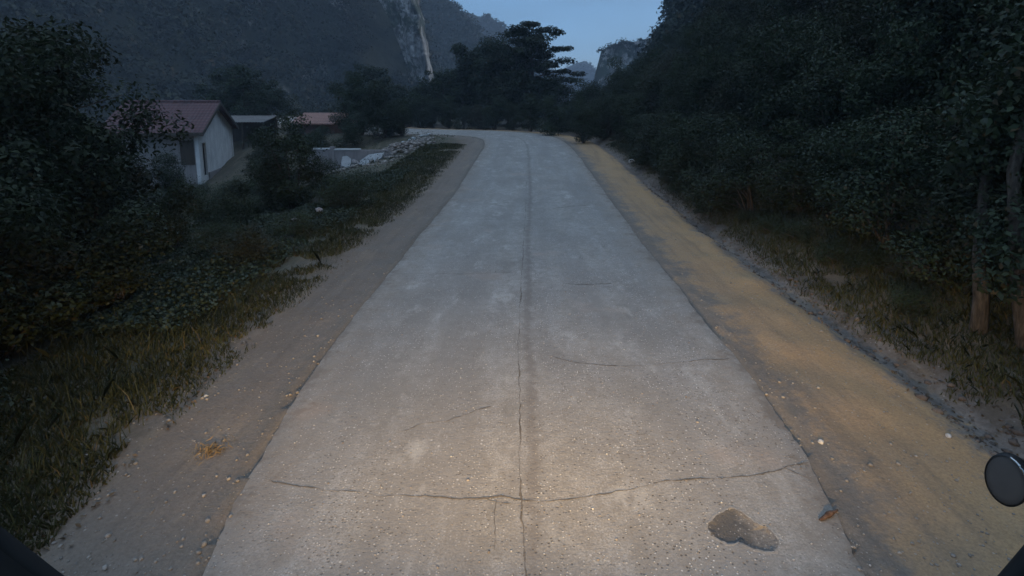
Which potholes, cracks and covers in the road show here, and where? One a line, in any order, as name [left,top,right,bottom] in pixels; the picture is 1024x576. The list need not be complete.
crack [272,462,808,504]
crack [553,356,729,366]
